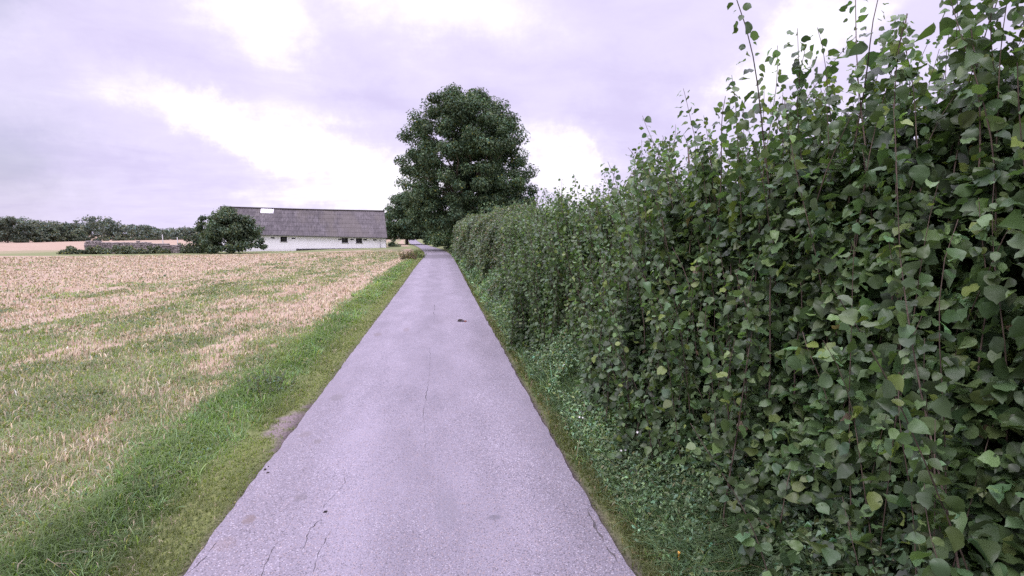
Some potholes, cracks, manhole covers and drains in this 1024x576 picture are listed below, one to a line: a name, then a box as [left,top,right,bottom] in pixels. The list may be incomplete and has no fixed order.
crack [585,507,618,562]
crack [261,478,346,576]
